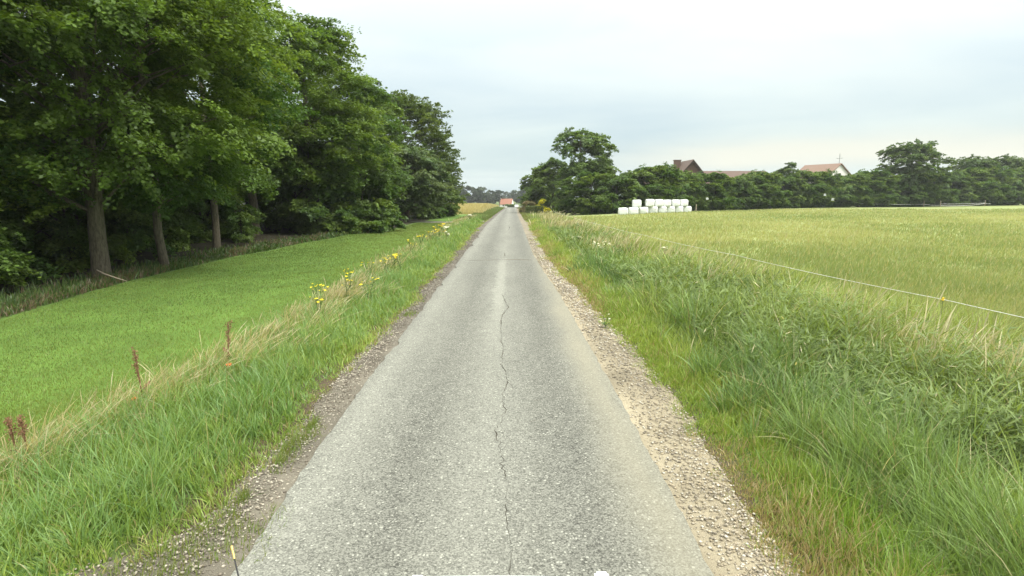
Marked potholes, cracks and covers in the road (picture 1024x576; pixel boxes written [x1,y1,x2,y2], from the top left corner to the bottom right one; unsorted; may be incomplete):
crack [494,295,513,574]
